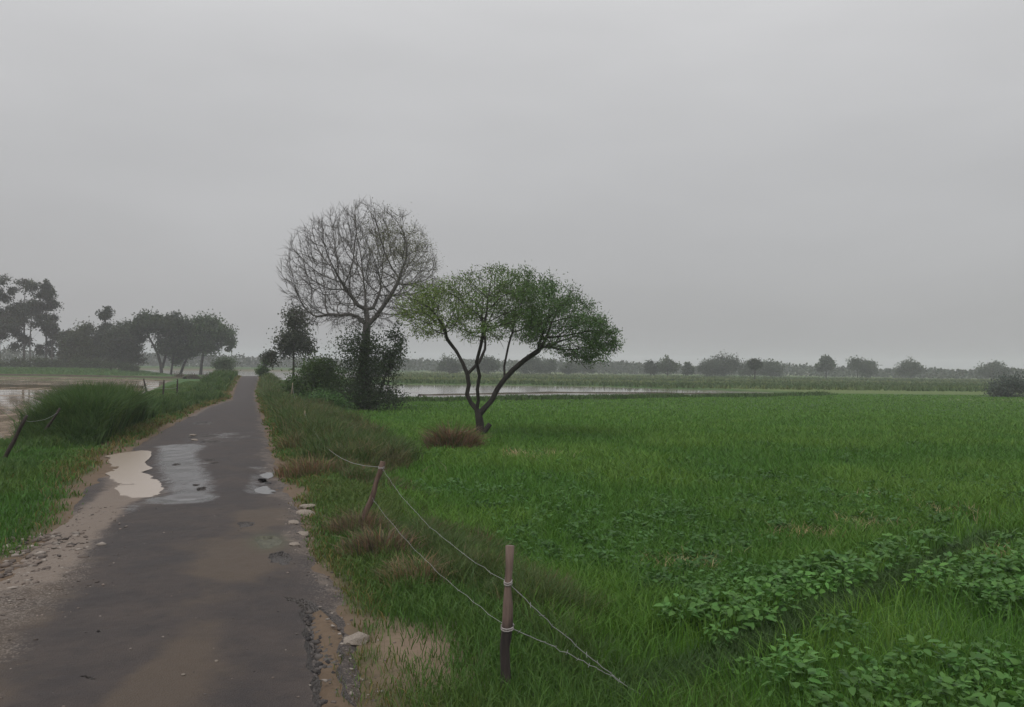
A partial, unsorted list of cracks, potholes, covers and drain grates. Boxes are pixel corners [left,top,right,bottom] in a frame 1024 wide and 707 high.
pothole [282,596,355,707]
